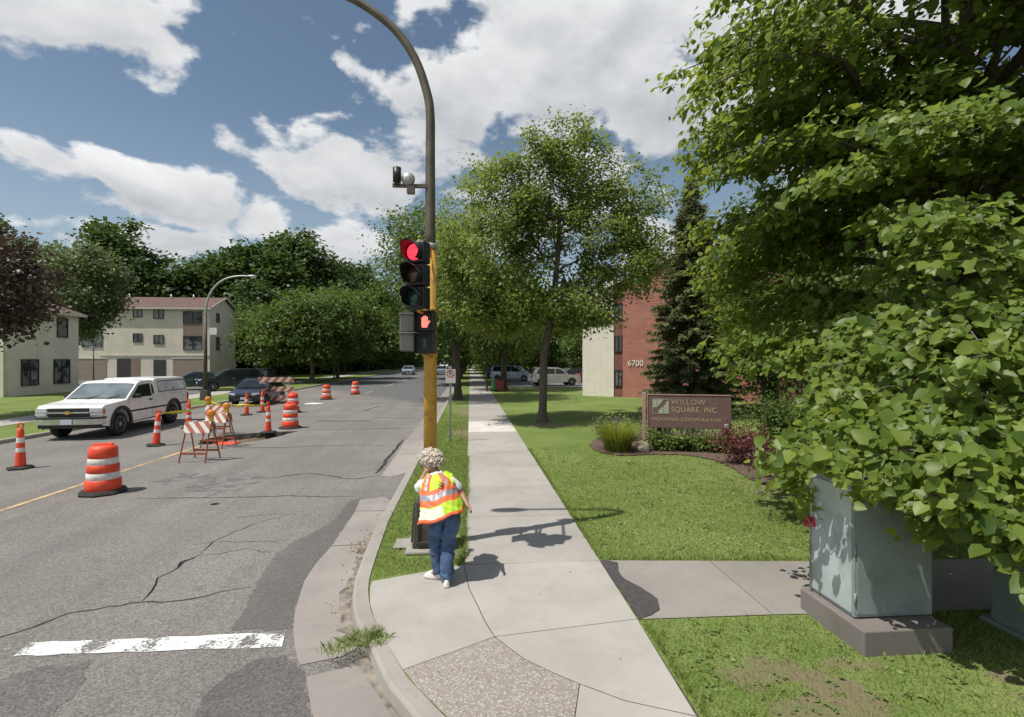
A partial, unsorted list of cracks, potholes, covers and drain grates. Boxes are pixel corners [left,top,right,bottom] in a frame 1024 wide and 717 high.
pothole [198,431,298,444]
crack [138,406,404,499]
crack [0,514,289,638]
